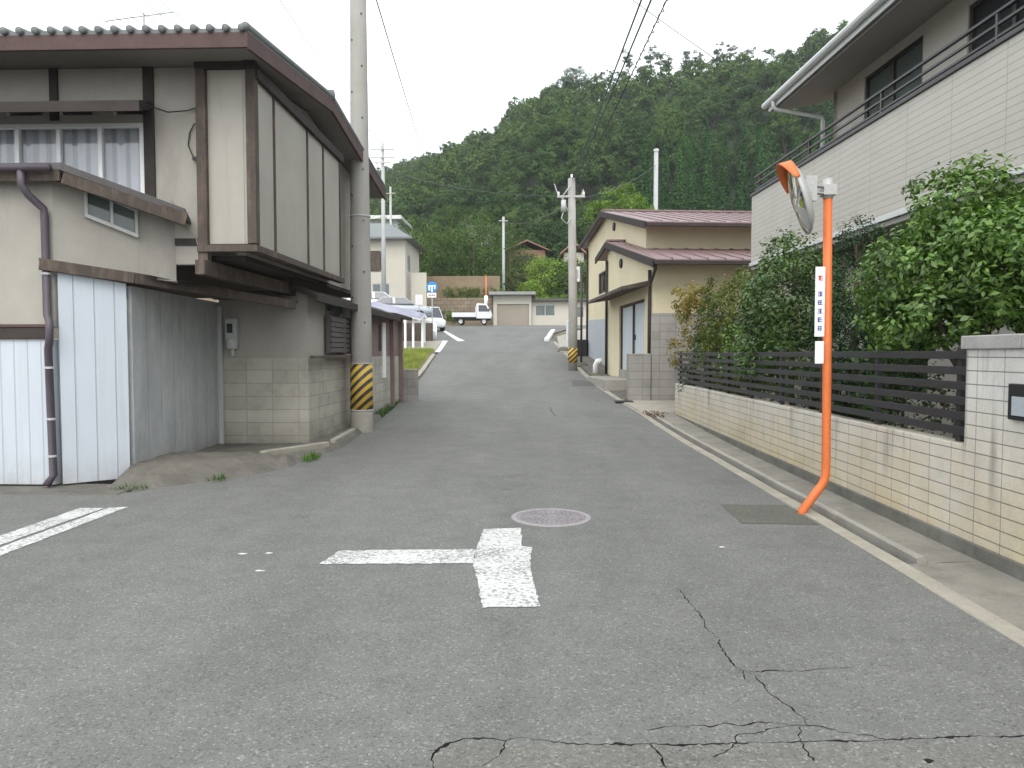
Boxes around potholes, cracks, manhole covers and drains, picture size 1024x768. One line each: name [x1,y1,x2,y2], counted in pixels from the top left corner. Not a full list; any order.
manhole cover [511,508,591,527]
crack [427,589,1024,768]
